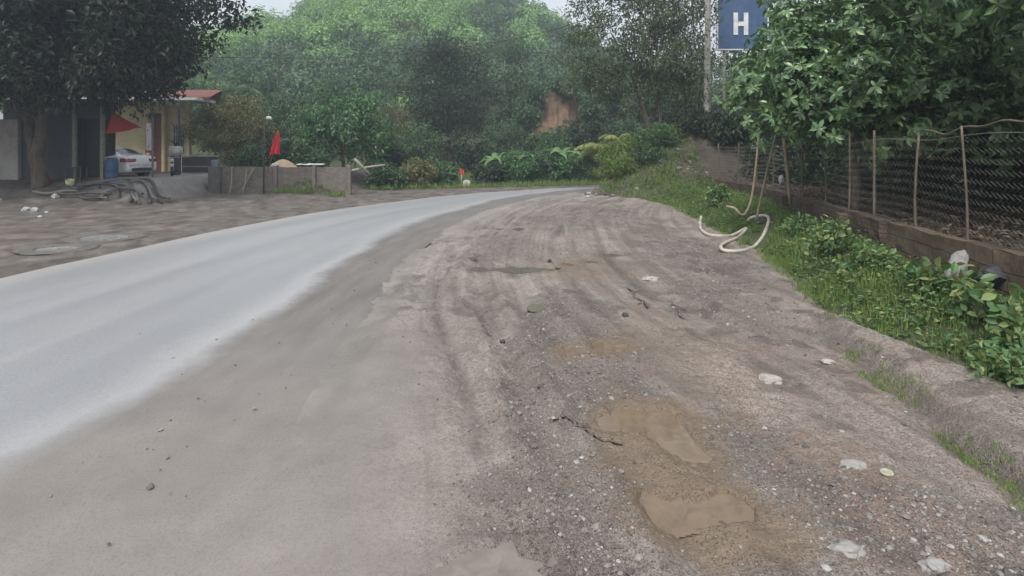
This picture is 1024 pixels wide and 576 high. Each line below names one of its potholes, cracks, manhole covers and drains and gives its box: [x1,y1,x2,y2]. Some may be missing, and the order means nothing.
crack [628,287,648,309]
pothole [623,481,769,546]
crack [670,300,687,319]
pothole [587,398,733,474]
pothole [443,261,567,276]
crack [553,414,623,446]
